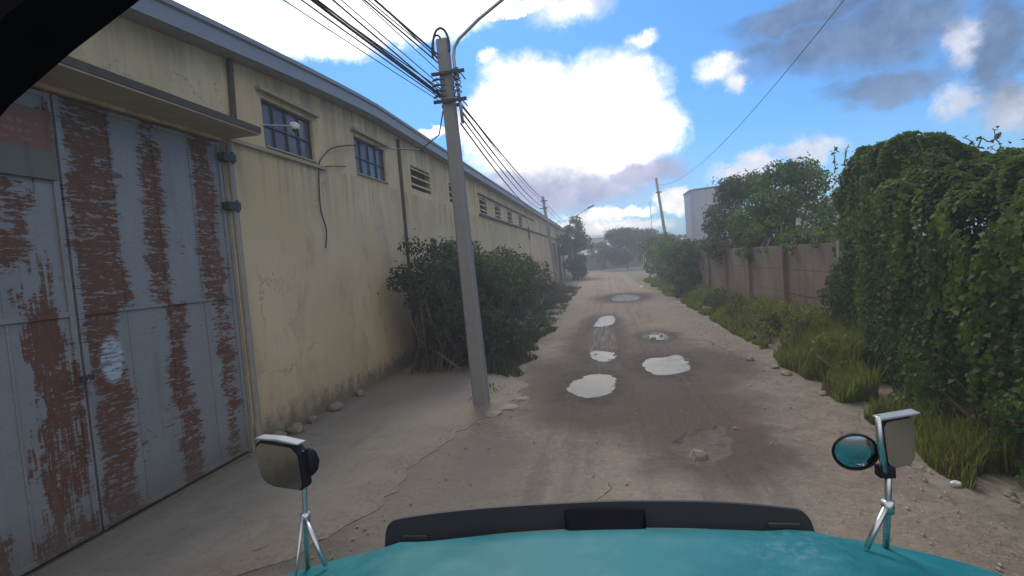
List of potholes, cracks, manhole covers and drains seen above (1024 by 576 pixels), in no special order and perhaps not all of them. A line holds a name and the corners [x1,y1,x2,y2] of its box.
pothole [642,355,691,375]
pothole [668,425,734,466]
pothole [590,350,617,362]
pothole [641,332,669,340]
pothole [565,374,617,398]
pothole [593,315,616,327]
